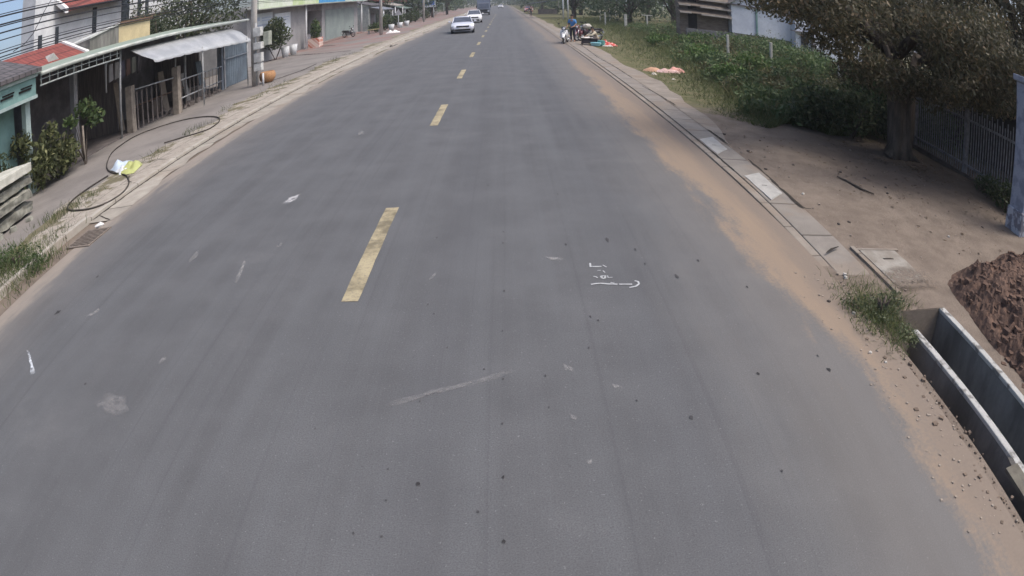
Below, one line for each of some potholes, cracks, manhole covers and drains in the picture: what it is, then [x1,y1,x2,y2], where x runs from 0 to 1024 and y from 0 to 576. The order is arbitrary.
manhole cover [850,246,925,295]
drain grate [66,227,111,249]
